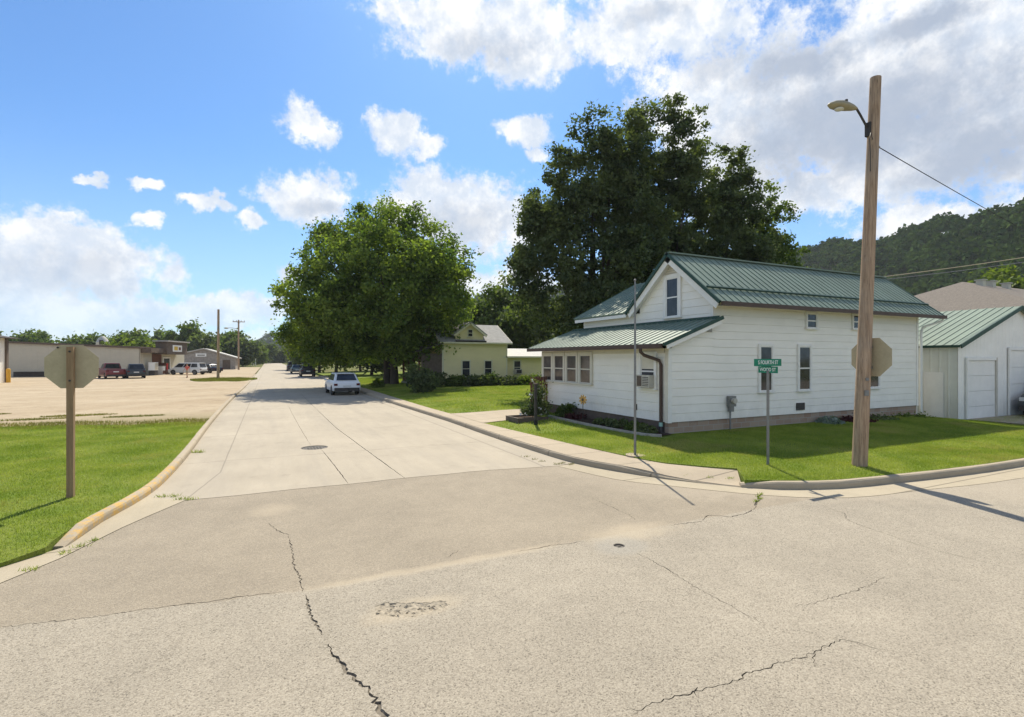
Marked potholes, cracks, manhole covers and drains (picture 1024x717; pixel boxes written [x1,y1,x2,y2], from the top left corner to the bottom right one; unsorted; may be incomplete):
crack [675,495,761,525]
crack [269,524,390,717]
crack [12,594,259,627]
pothole [375,601,449,617]
crack [628,639,880,711]
